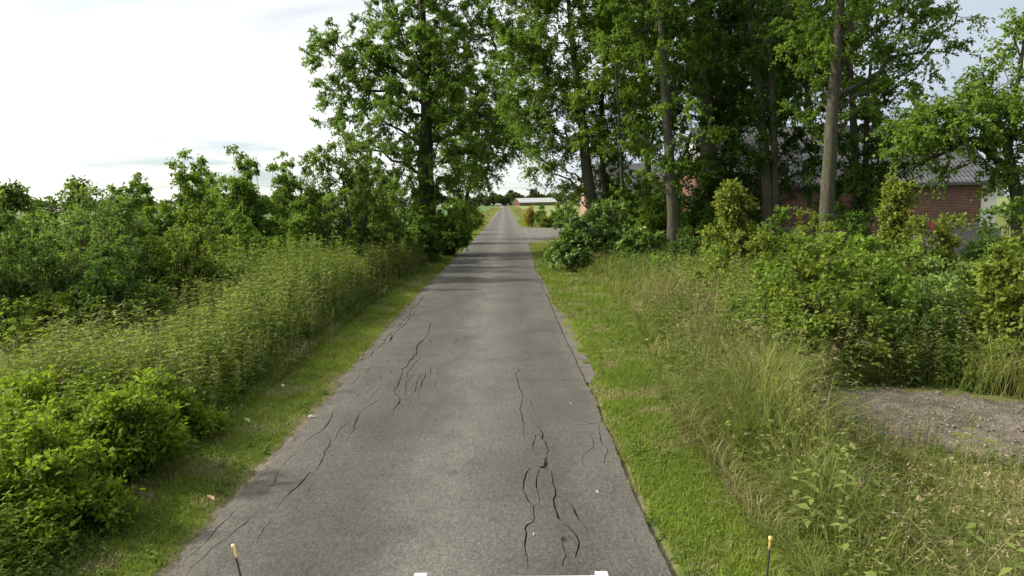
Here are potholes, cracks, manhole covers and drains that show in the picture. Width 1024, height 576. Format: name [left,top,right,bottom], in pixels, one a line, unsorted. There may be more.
crack [515,358,608,573]
crack [186,295,457,576]
